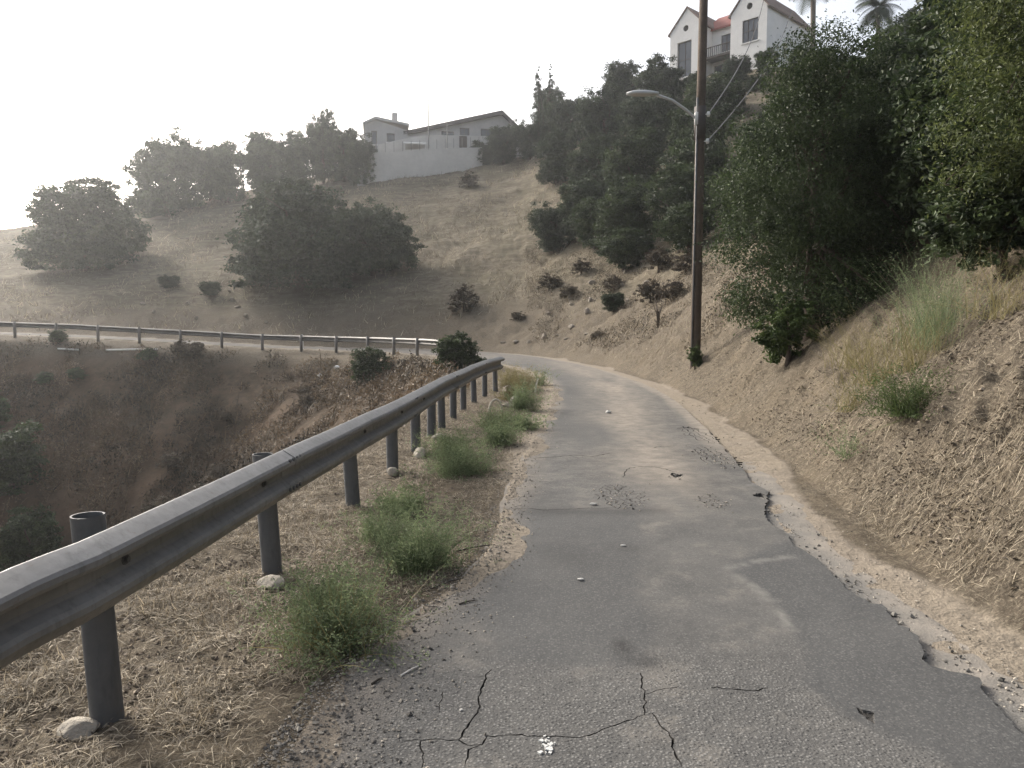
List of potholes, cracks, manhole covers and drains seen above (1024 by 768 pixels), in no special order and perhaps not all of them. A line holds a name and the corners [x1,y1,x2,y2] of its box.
crack [407,670,682,768]
crack [533,453,671,508]
pothole [857,708,875,723]
